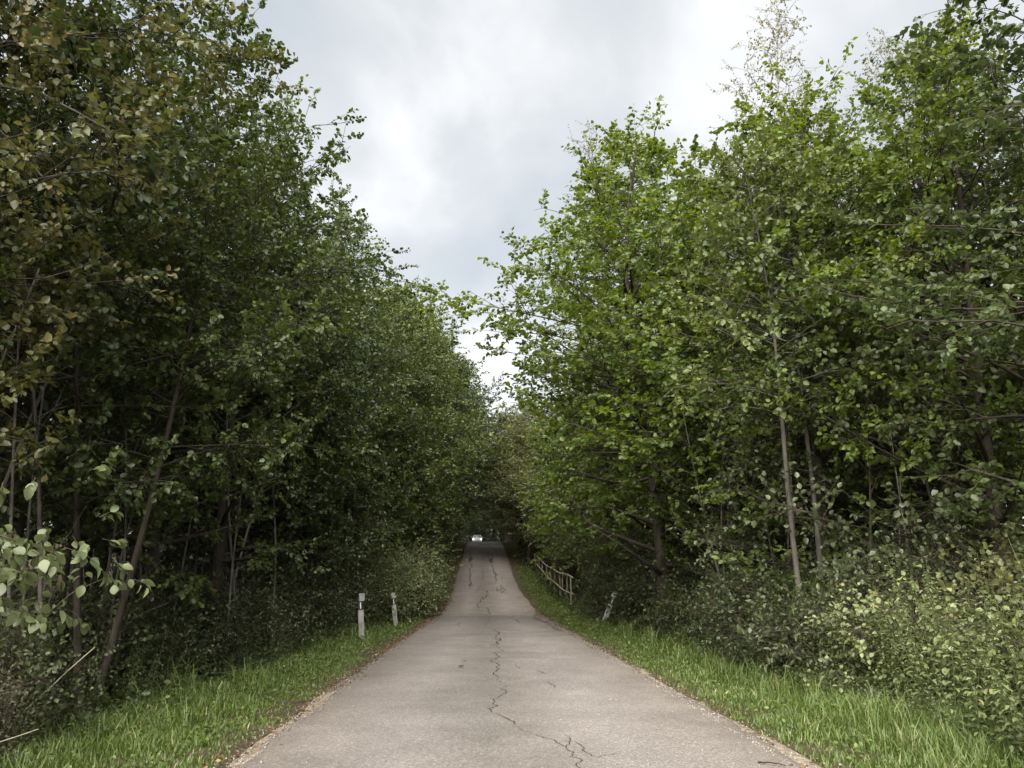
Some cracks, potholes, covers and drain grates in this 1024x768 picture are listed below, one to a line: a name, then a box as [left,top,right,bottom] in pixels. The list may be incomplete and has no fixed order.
crack [458,551,615,768]
